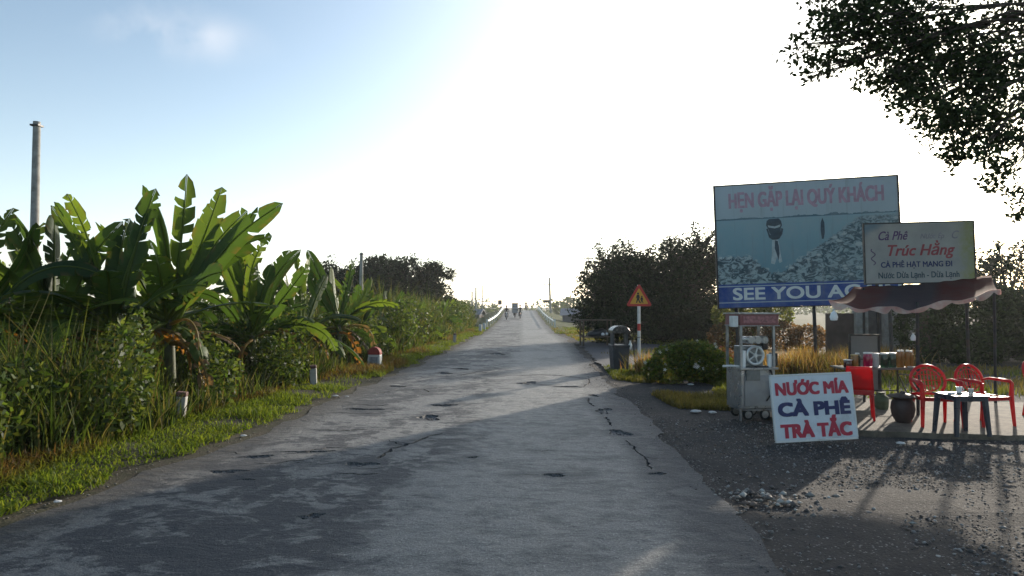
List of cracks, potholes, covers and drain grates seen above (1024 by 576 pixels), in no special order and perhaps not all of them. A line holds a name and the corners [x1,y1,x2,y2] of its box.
crack [234,387,442,475]
crack [521,375,656,473]
